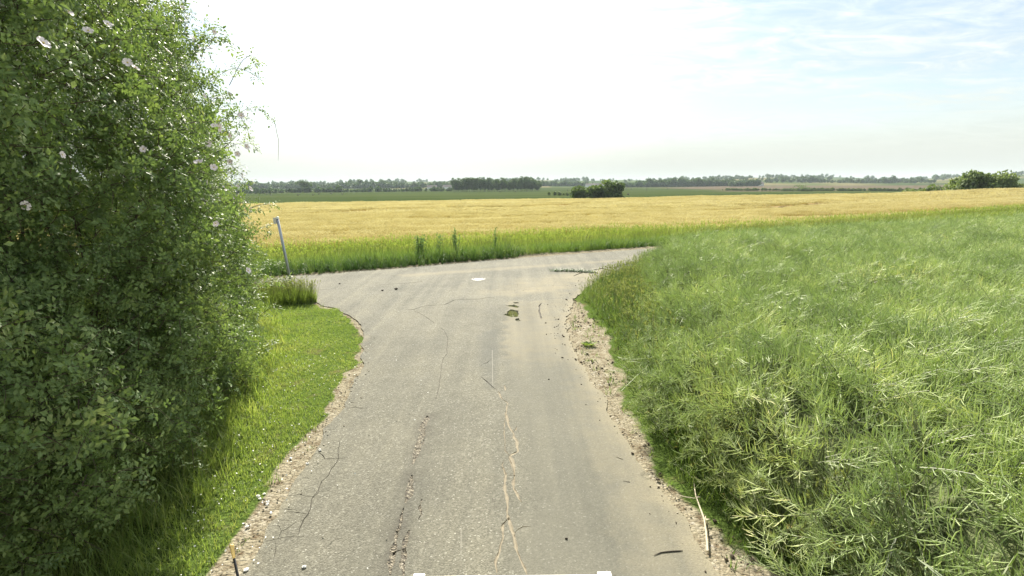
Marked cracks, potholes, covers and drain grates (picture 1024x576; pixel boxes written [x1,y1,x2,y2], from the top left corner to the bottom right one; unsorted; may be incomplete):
crack [386,416,430,576]
crack [411,297,489,399]
crack [483,361,530,574]
crack [268,388,359,556]
